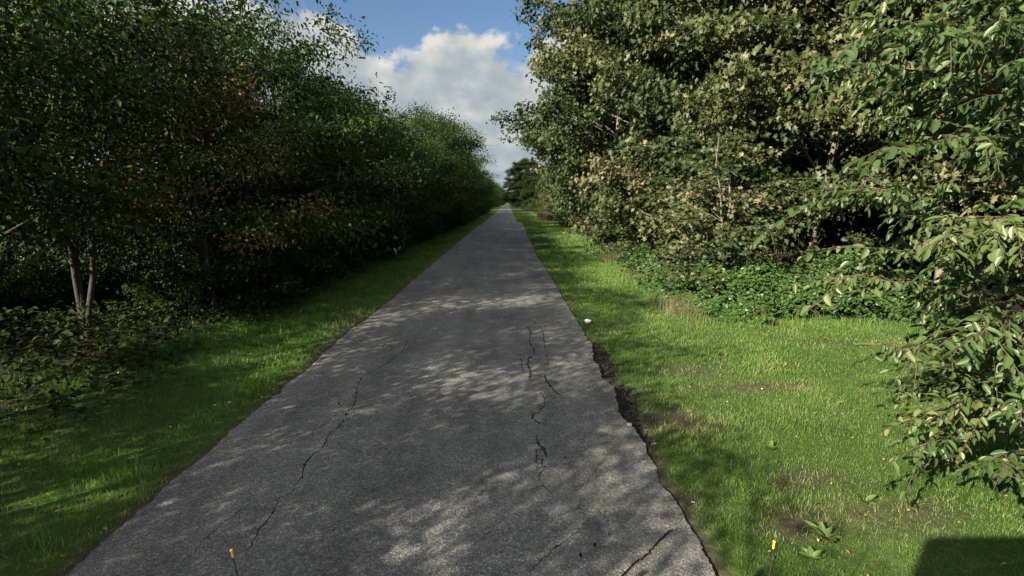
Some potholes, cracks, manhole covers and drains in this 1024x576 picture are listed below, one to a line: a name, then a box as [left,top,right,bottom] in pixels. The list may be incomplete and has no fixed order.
crack [186,335,409,559]
crack [527,510,681,576]
crack [498,315,578,491]
